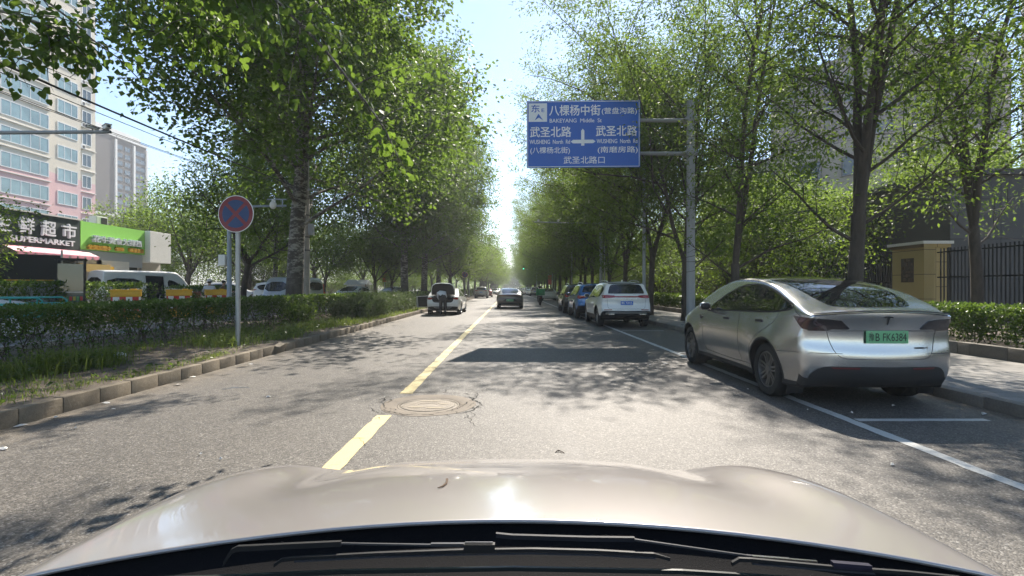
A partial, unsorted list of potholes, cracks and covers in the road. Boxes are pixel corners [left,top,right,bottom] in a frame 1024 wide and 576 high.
manhole cover [380,395,476,417]
crack [373,389,481,424]
